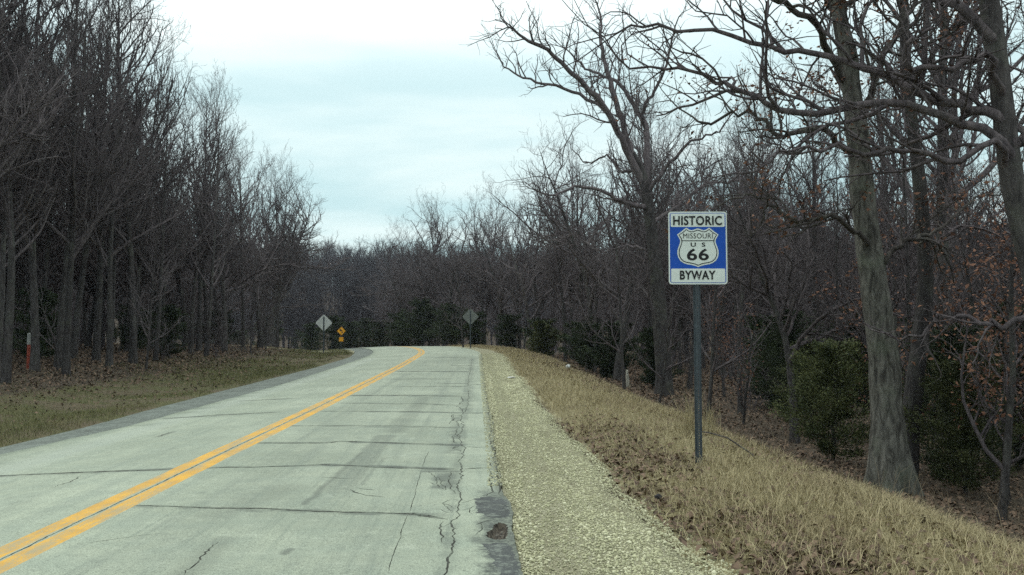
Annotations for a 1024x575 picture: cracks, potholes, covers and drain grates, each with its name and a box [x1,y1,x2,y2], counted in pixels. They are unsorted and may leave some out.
pothole [486,522,509,540]
crack [141,360,501,575]
